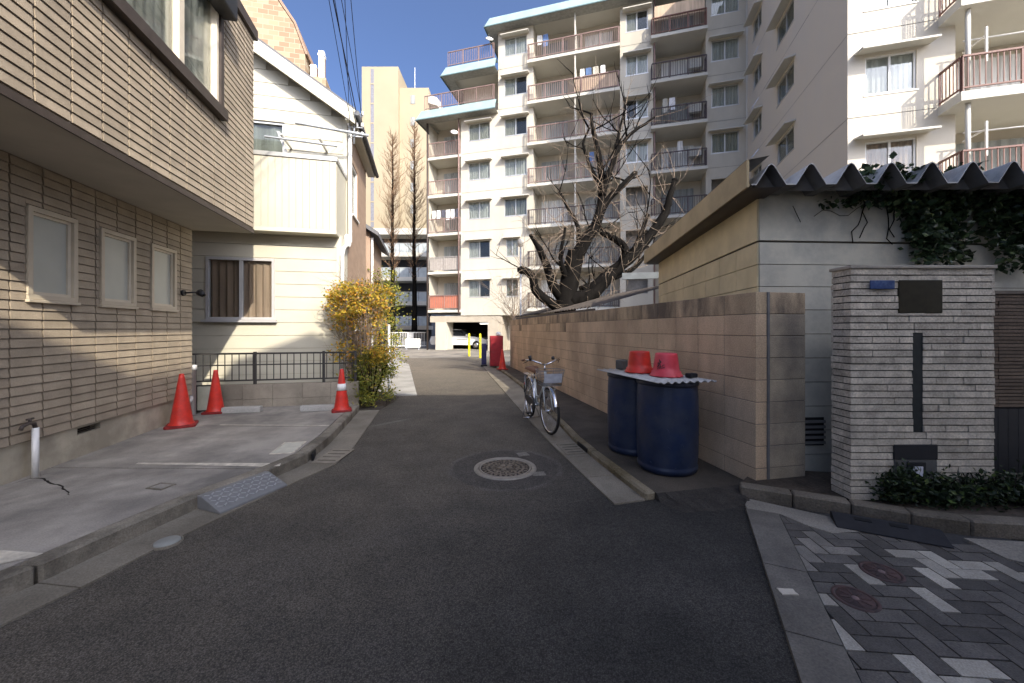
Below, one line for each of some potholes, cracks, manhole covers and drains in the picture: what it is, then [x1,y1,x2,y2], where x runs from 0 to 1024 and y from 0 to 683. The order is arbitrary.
manhole cover [474,457,536,481]
manhole cover [858,561,906,584]
crack [16,478,70,495]
manhole cover [830,585,882,613]
manhole cover [150,535,184,551]
utility cover [145,482,176,490]
